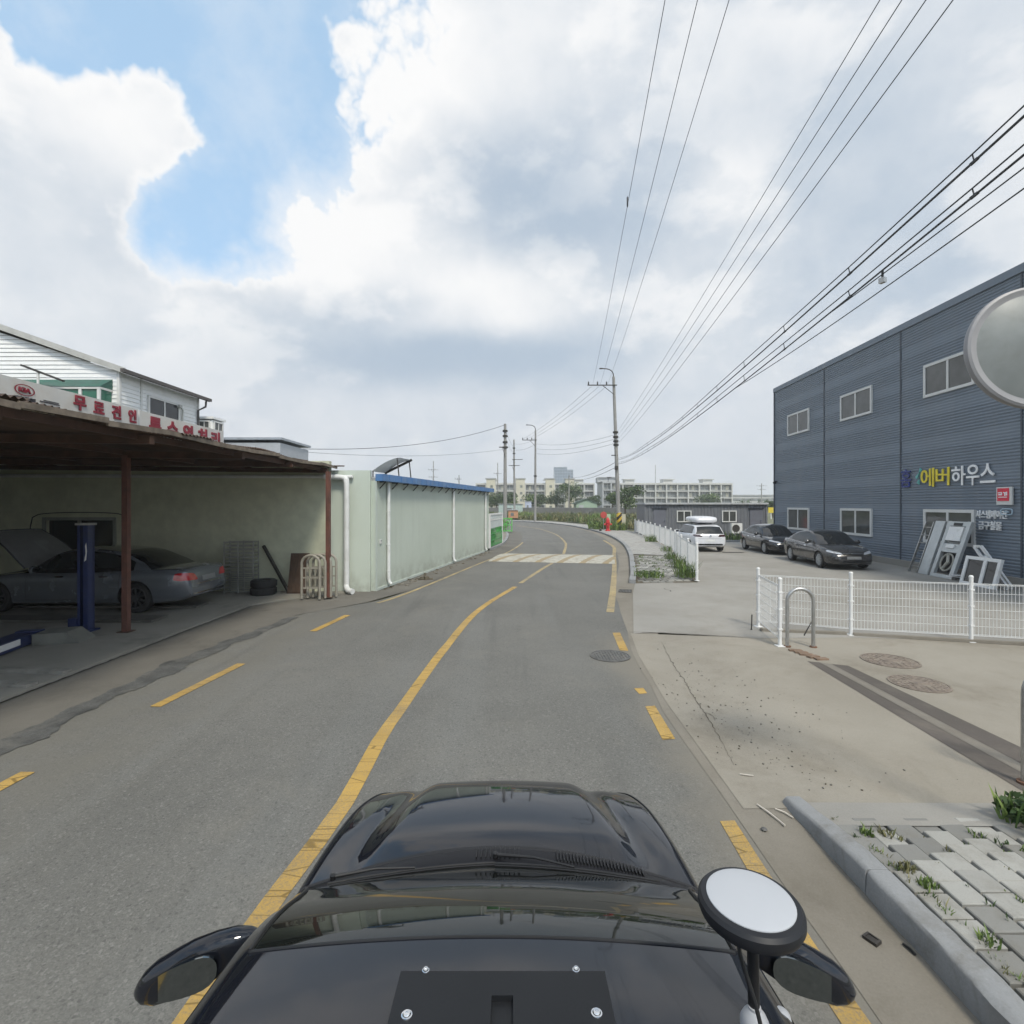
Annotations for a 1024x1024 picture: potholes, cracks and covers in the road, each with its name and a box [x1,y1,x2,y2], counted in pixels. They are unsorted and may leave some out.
manhole cover [887,675,953,693]
manhole cover [590,650,631,662]
manhole cover [860,653,922,669]
